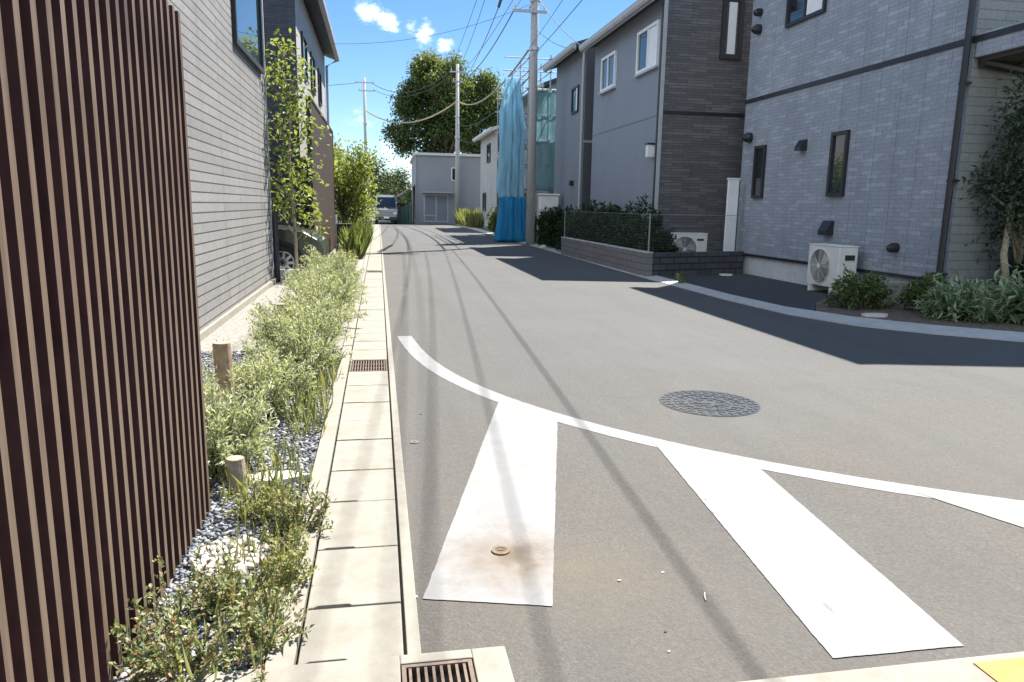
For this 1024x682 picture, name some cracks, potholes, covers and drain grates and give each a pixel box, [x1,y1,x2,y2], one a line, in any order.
manhole cover [659,390,761,417]
utility cover [492,545,510,556]
drain grate [349,359,387,372]
drain grate [402,659,476,682]
